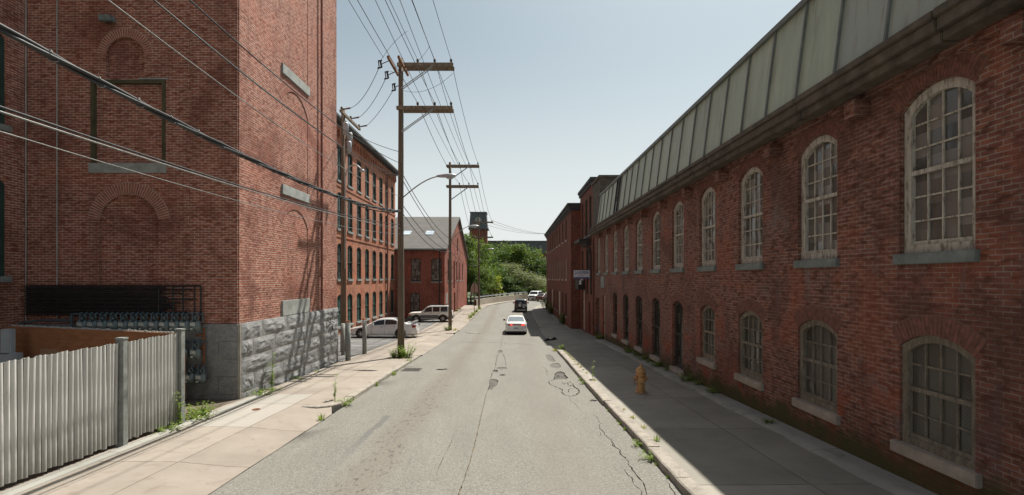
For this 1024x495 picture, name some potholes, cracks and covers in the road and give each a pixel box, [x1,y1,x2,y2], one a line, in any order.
crack [546,370,647,495]
